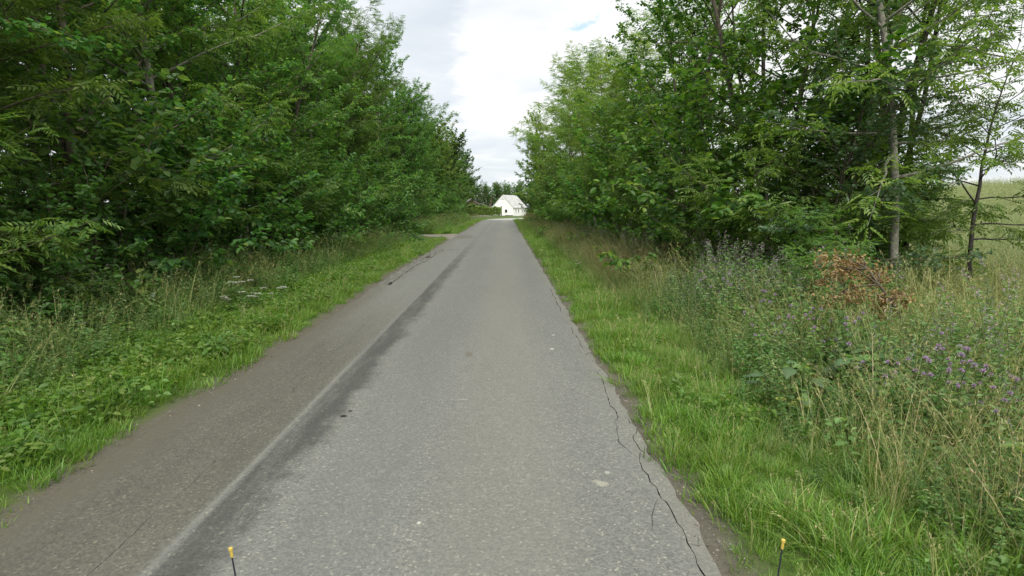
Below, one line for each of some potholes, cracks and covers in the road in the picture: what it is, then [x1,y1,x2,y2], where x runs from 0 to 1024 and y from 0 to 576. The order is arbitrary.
crack [551,291,709,576]
